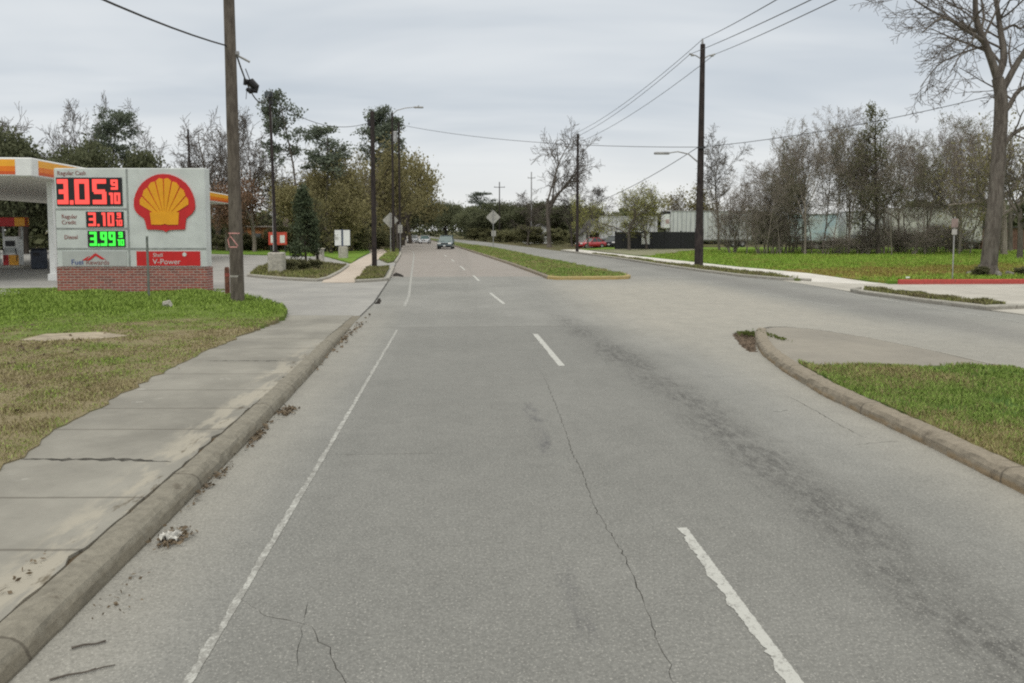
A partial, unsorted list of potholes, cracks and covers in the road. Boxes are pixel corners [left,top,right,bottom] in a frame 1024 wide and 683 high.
crack [545,379,672,680]
crack [234,594,346,683]
